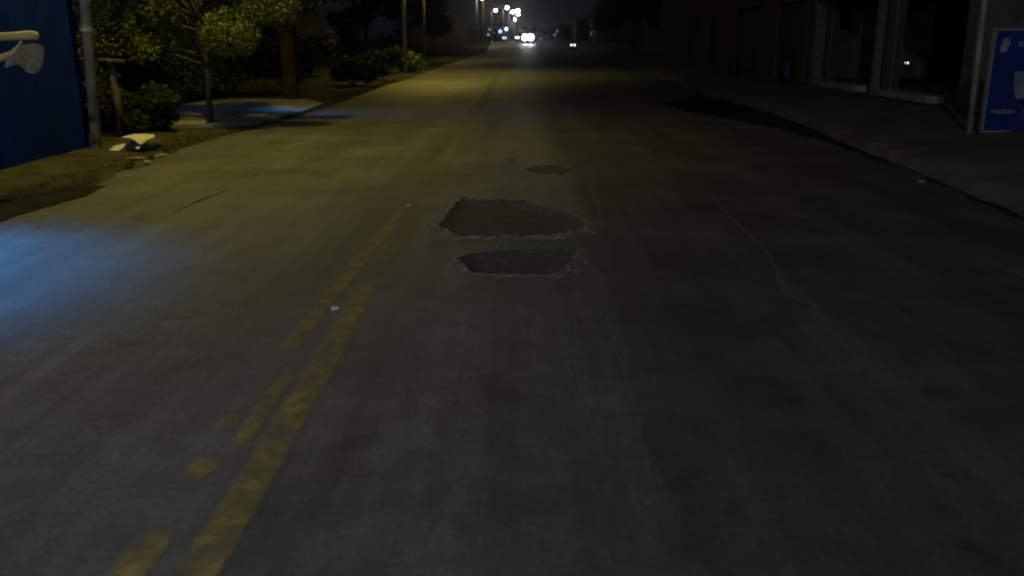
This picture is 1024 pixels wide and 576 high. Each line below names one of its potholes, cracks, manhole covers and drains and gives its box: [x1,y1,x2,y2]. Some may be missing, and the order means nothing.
crack [564,288,611,467]
pothole [521,164,574,175]
crack [708,196,887,379]
crack [173,190,227,213]
pothole [429,196,599,240]
pothole [447,245,589,280]
